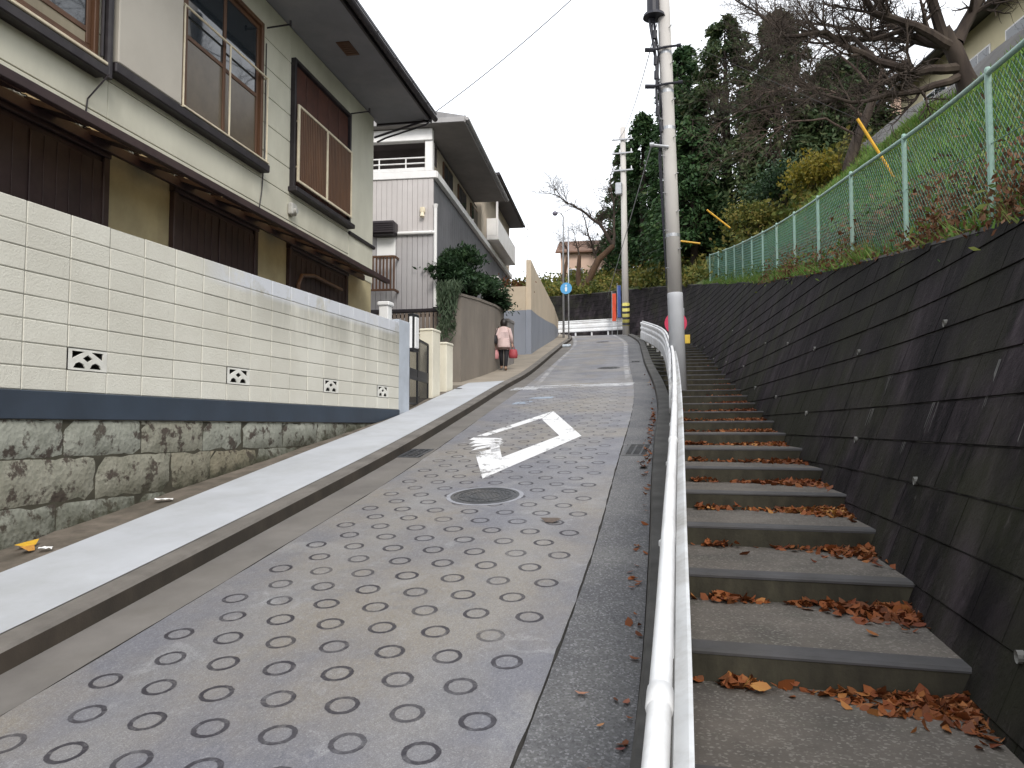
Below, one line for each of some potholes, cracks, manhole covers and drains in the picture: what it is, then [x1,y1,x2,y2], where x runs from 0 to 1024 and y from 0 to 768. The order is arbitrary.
drain grate [621,444,654,463]
drain grate [398,449,434,458]
manhole cover [446,487,524,506]
